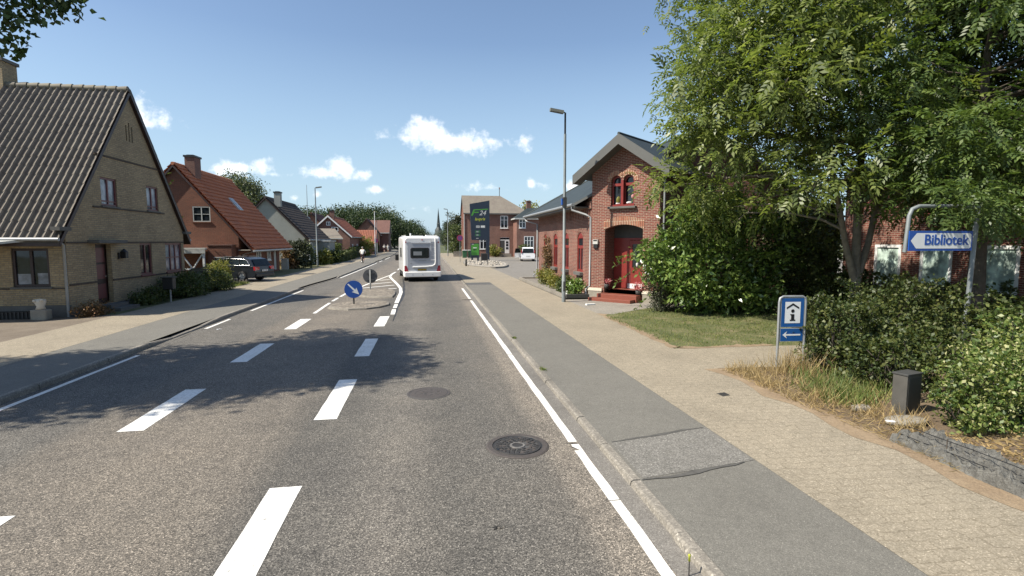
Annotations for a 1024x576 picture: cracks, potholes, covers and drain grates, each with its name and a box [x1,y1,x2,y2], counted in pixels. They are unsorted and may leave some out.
manhole cover [407,387,450,400]
manhole cover [486,434,549,459]
